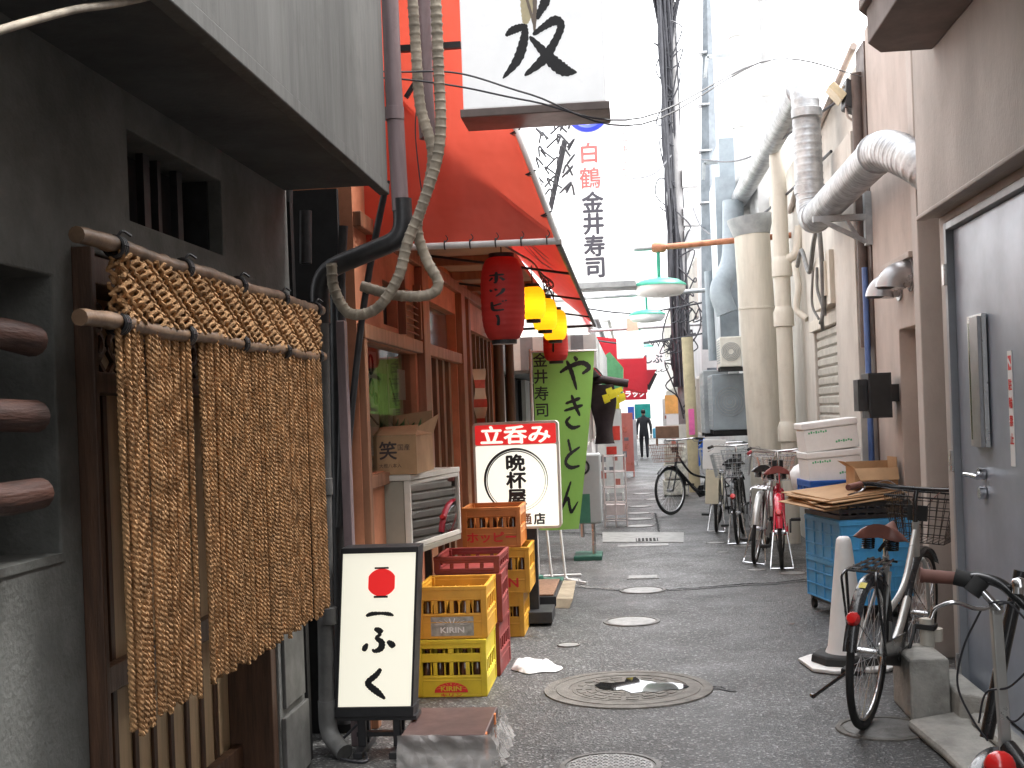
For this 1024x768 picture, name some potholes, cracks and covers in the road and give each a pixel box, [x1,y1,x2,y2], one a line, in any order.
manhole cover [544,670,713,710]
manhole cover [619,586,666,594]
manhole cover [603,616,660,627]
manhole cover [559,752,662,768]
